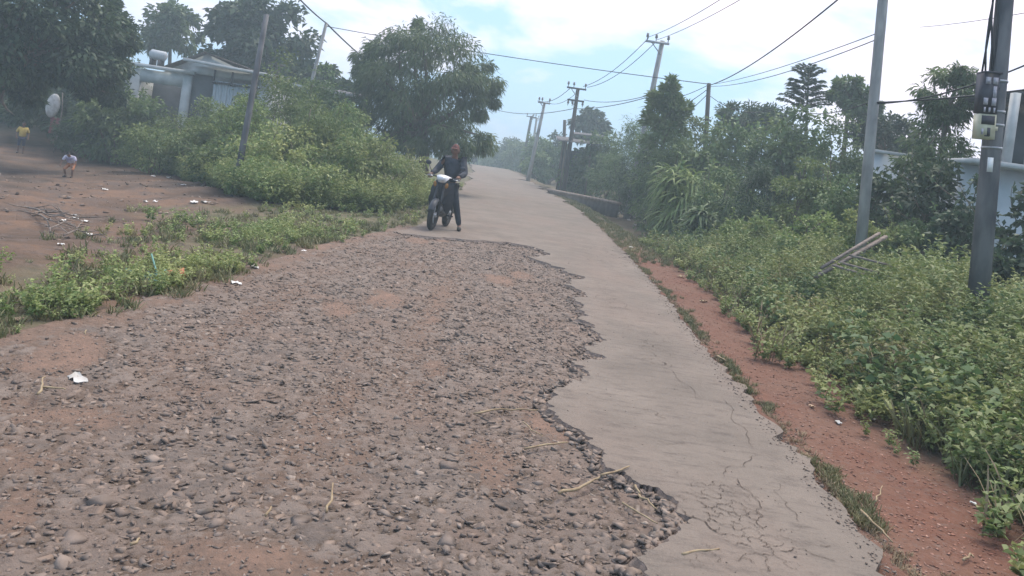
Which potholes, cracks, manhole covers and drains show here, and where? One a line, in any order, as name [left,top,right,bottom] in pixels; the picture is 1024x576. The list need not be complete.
crack [680,456,832,571]
pothole [0,225,692,576]
